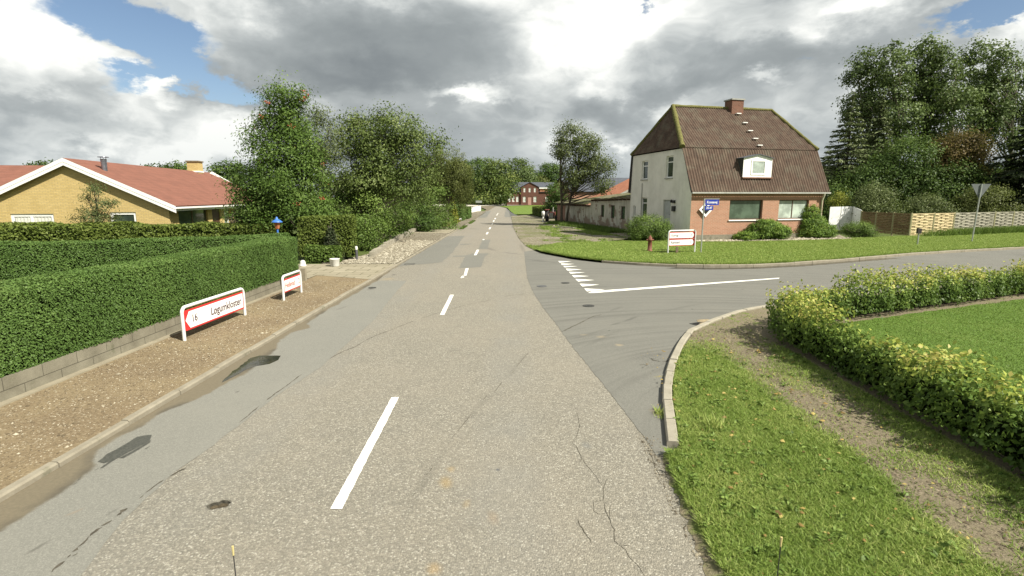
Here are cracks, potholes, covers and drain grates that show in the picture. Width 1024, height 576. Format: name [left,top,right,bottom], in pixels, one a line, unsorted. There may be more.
crack [573,418,643,573]
pothole [206,500,231,510]
